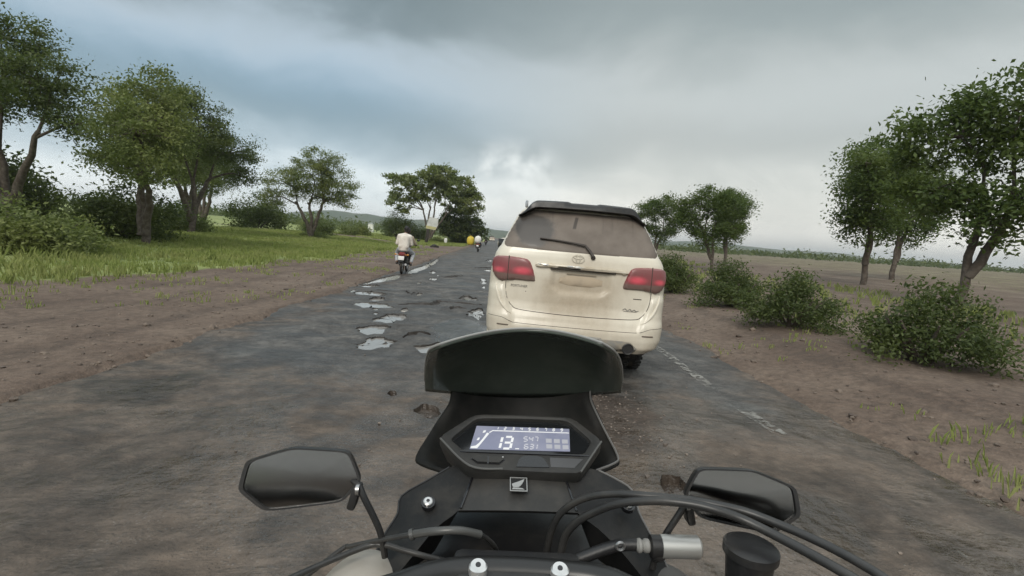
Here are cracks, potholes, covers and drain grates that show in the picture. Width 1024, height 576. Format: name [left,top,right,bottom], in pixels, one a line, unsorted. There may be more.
pothole [660,475,686,494]
pothole [355,337,397,350]
pothole [413,403,441,419]
pothole [414,341,444,353]
pothole [355,324,391,335]
pothole [466,308,485,320]
pothole [372,313,407,323]
